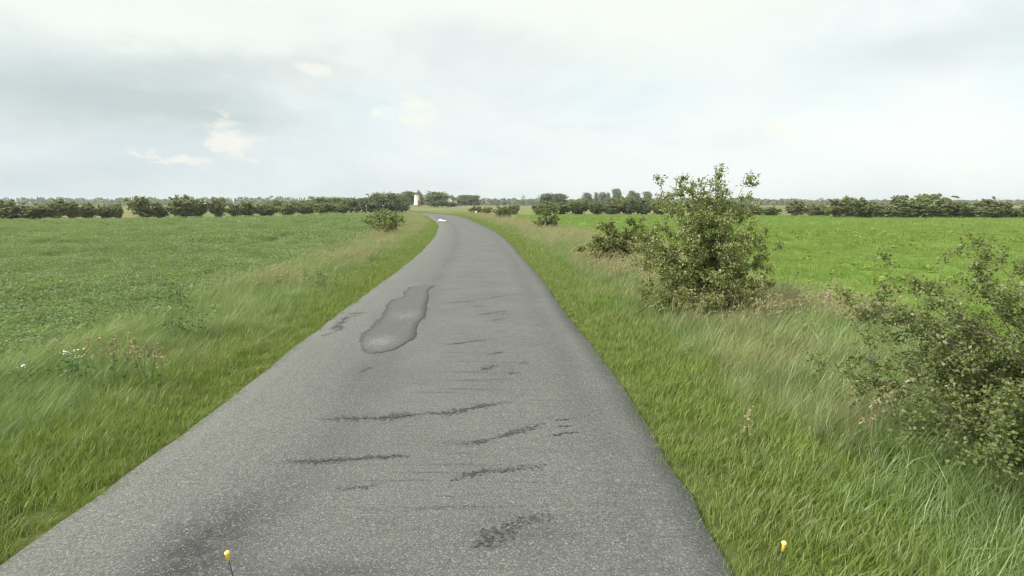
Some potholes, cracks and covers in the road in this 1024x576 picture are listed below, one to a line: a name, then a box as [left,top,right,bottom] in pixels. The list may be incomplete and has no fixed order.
crack [471,510,554,550]
crack [287,453,411,465]
crack [450,461,547,480]
crack [458,418,577,446]
crack [446,243,525,374]
crack [318,400,515,421]
